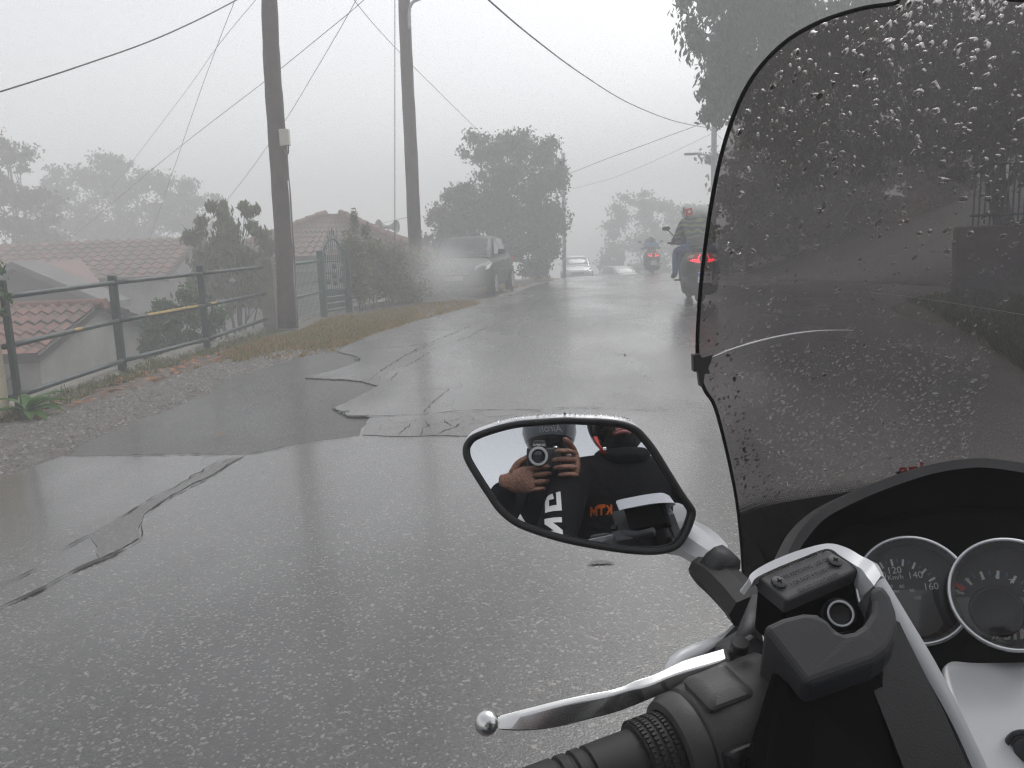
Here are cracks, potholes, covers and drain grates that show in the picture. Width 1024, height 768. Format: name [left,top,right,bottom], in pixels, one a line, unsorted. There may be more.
crack [0,435,355,607]
crack [332,388,700,437]
